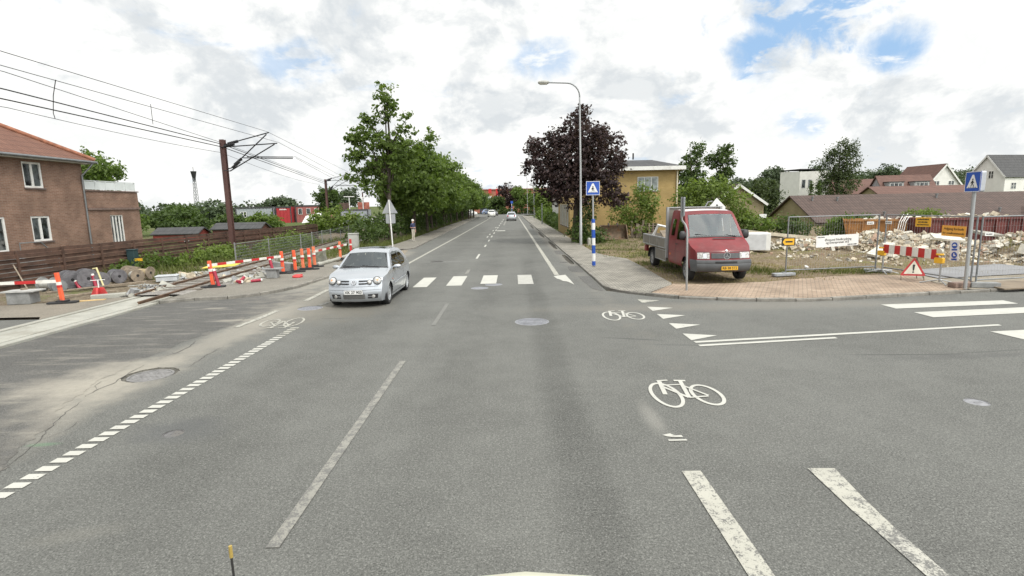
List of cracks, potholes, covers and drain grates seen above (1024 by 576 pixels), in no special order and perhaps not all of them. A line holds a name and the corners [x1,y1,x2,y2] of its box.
manhole cover [120,367,180,383]
crack [0,364,145,472]
utility cover [162,430,185,438]
utility cover [963,398,991,406]
